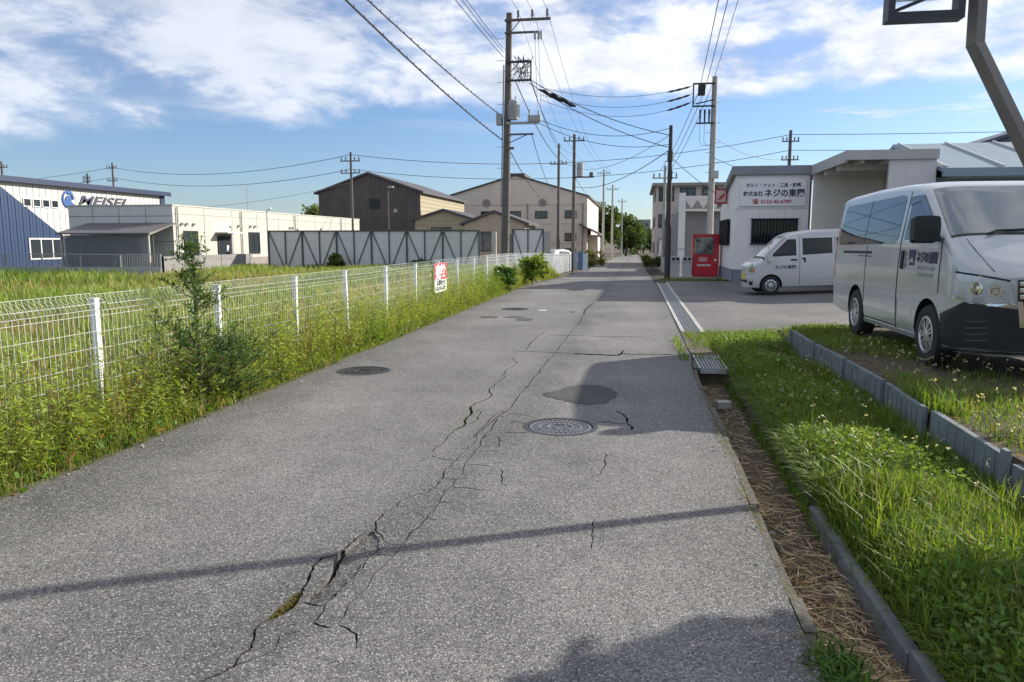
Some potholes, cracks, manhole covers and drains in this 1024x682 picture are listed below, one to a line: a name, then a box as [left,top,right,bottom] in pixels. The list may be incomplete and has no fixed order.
drain grate [693,355,728,374]
crack [200,331,672,682]
manhole cover [336,366,391,375]
manhole cover [523,418,598,436]
